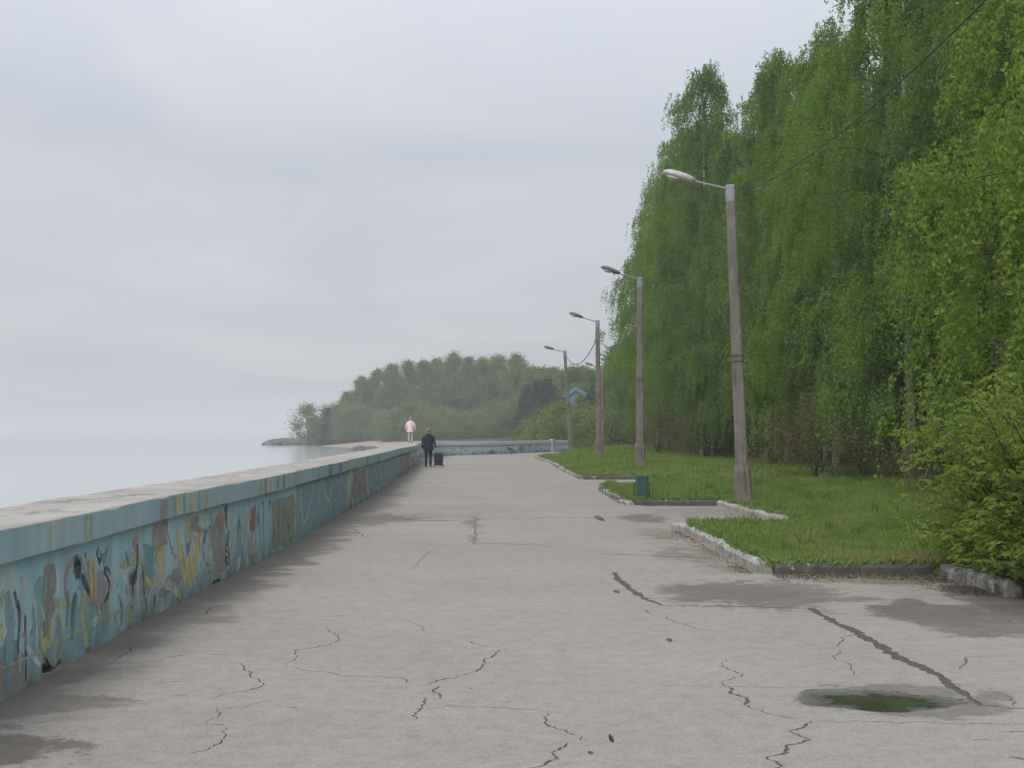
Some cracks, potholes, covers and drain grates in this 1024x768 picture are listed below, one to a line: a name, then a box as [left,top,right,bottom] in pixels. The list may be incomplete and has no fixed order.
crack [194,654,265,753]
pothole [797,688,976,713]
crack [833,634,855,676]
crack [720,660,813,768]
crack [286,615,586,768]
